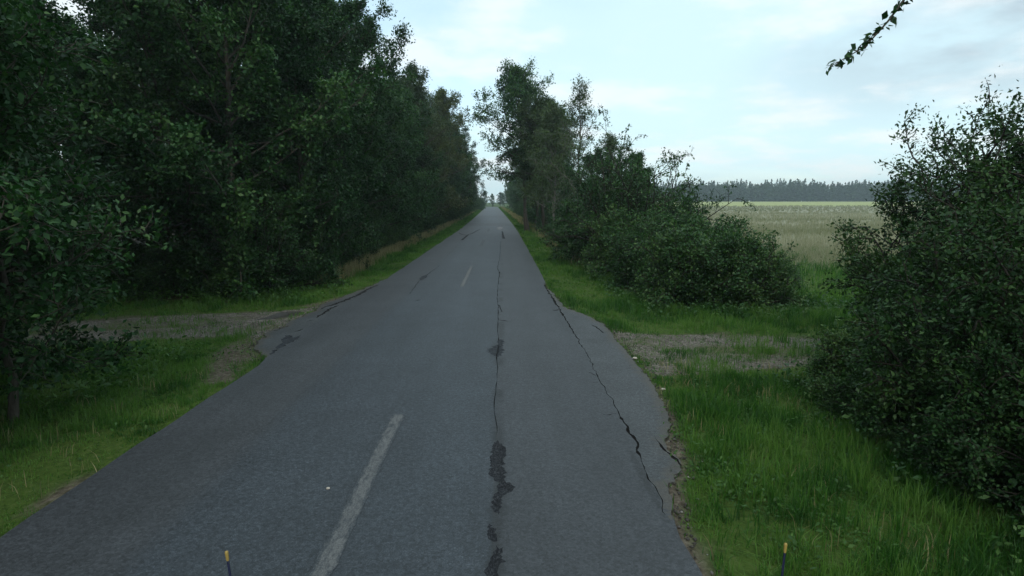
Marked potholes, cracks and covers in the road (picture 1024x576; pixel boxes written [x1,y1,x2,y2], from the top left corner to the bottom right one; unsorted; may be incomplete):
crack [274,285,377,332]
crack [544,286,680,513]
crack [494,242,505,426]
